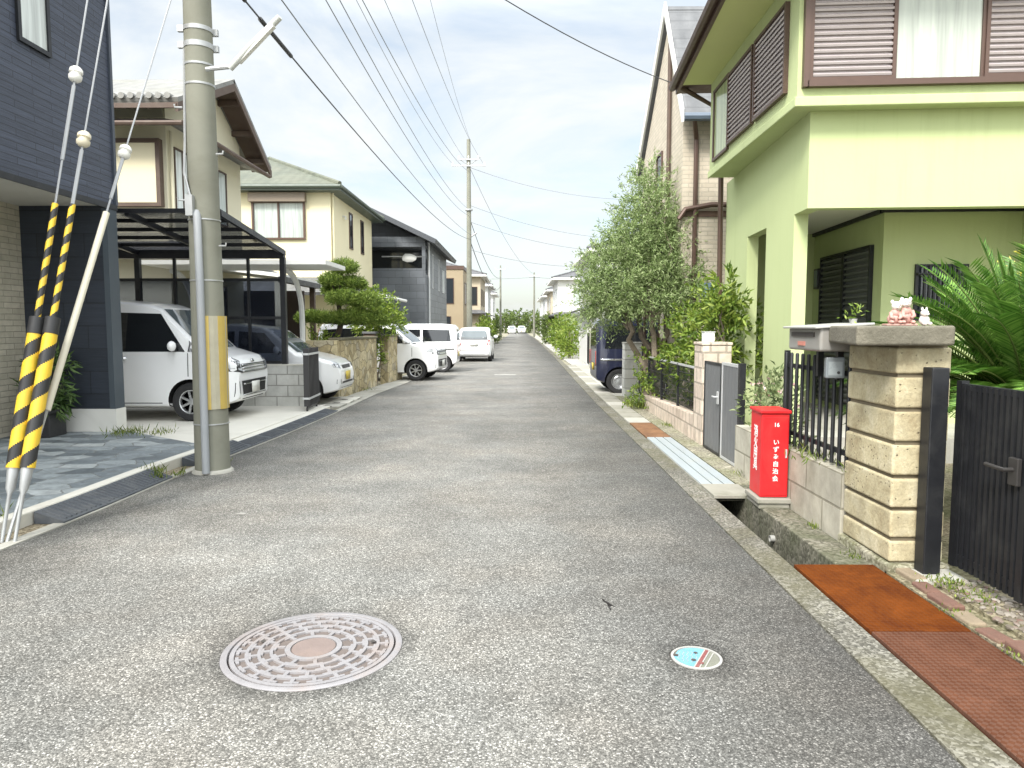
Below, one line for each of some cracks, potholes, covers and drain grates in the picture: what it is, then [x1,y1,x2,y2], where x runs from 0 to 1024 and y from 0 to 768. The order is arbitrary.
manhole cover [669,646,724,670]
manhole cover [219,612,402,692]
